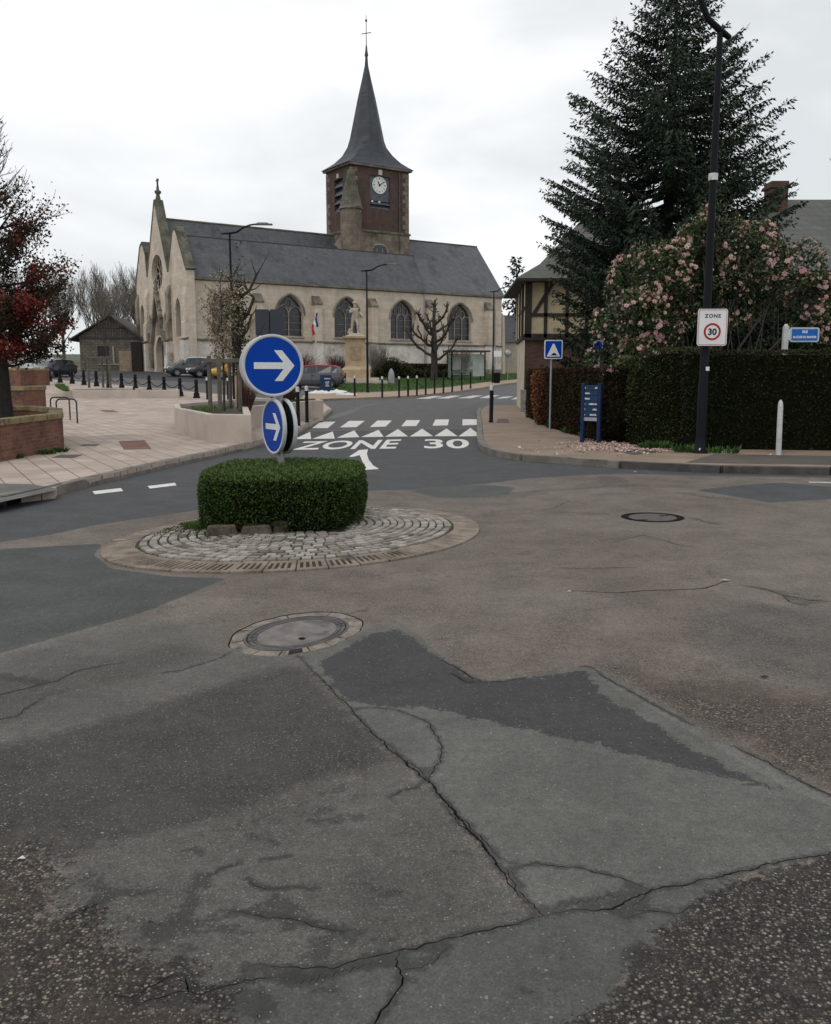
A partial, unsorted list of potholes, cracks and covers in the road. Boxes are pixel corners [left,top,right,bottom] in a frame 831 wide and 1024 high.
manhole cover [228,611,364,656]
crack [572,582,722,593]
crack [1,663,117,719]
manhole cover [621,512,685,522]
crack [104,656,831,1024]
